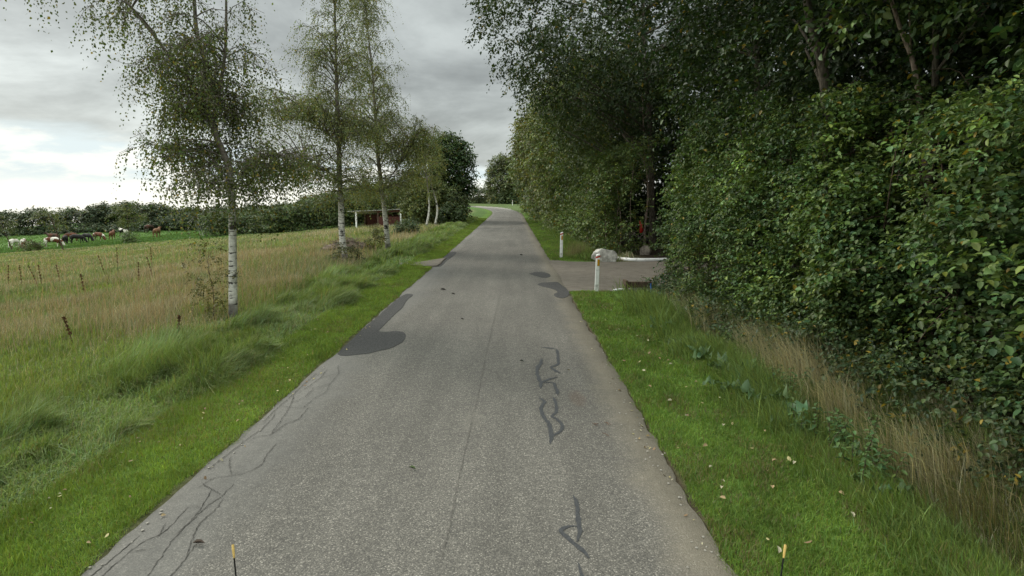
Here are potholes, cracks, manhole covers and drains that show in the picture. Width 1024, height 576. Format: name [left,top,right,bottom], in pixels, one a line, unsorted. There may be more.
crack [90,371,339,576]
